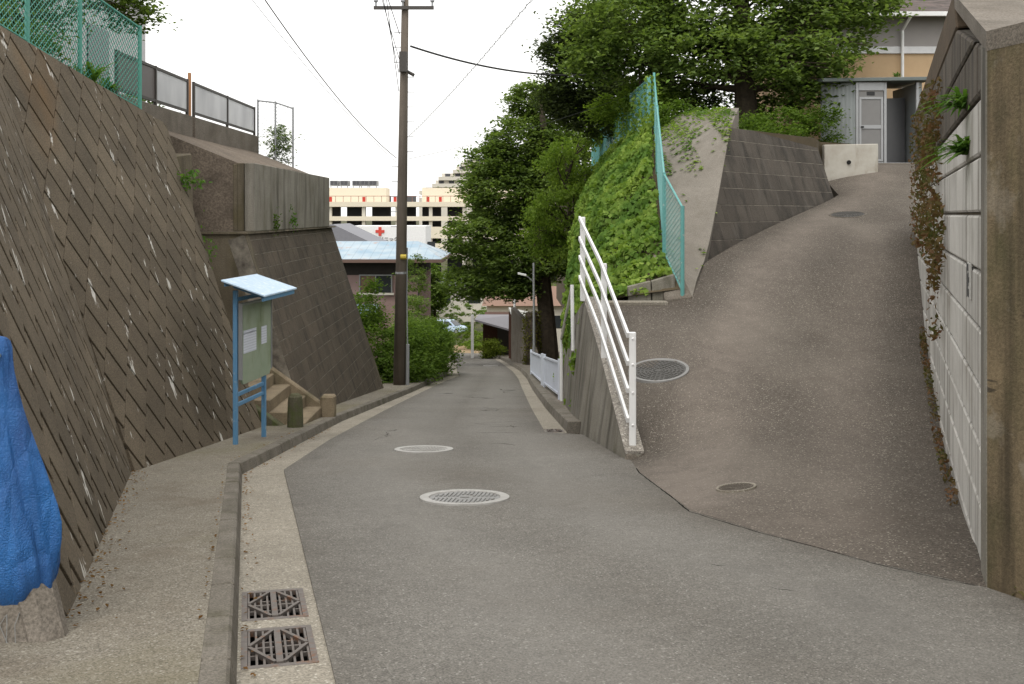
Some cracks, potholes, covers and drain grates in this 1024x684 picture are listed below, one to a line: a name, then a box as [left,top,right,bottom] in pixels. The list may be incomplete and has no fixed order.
manhole cover [716,482,756,493]
drain grate [241,625,319,670]
manhole cover [419,489,510,506]
manhole cover [628,358,689,383]
drain grate [241,588,309,622]
manhole cover [394,445,453,453]
